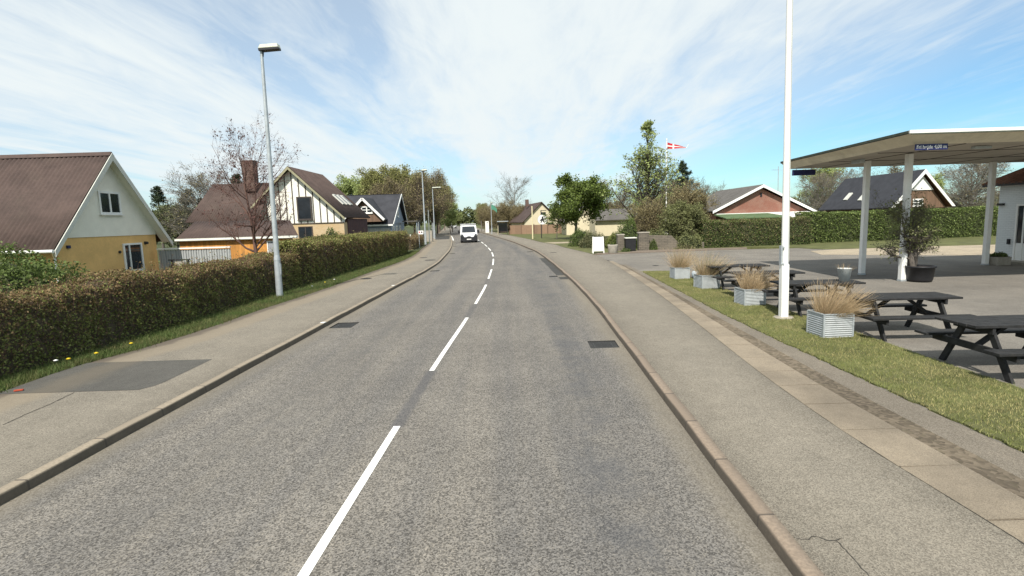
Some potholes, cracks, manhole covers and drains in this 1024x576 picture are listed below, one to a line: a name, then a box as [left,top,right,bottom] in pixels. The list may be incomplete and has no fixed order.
crack [794,536,869,576]
